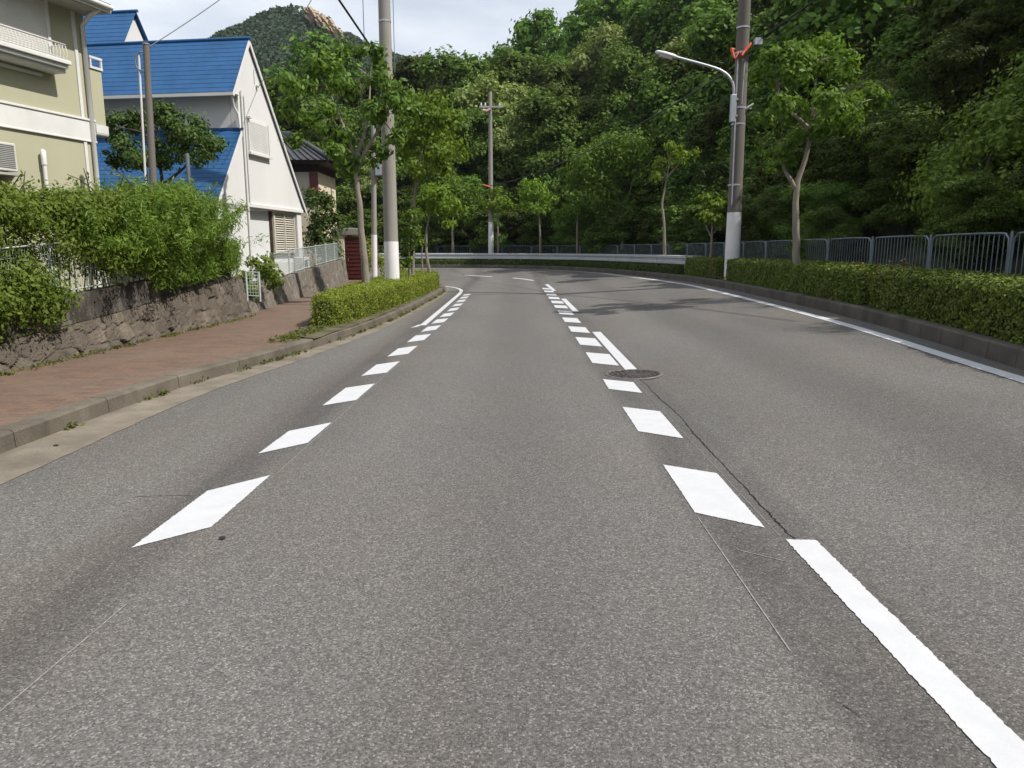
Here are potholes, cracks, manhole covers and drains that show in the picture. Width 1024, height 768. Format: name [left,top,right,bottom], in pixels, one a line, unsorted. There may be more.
manhole cover [605,369,664,380]
crack [639,379,795,538]
